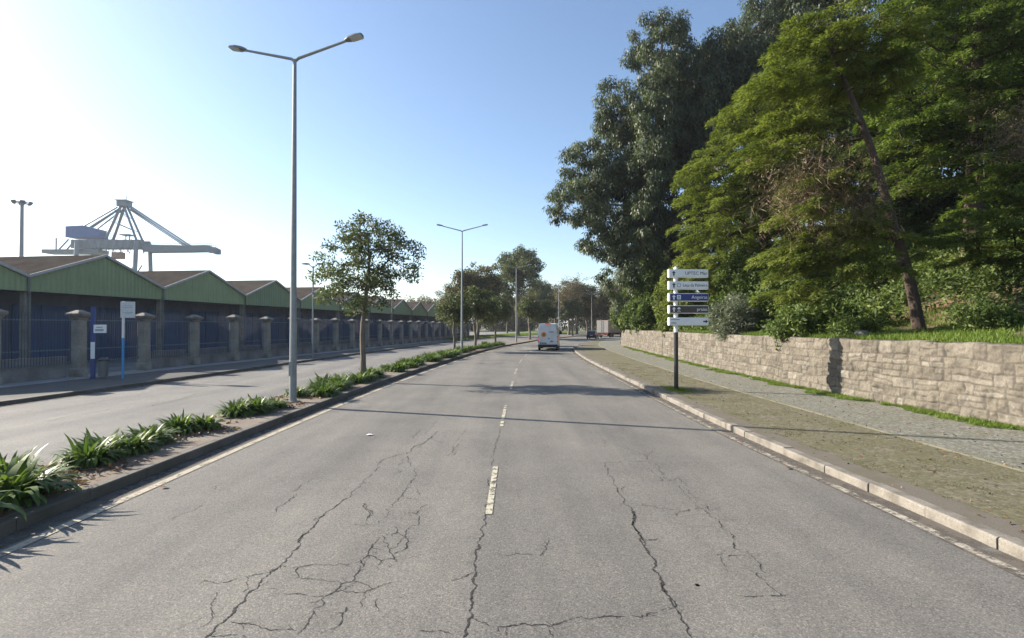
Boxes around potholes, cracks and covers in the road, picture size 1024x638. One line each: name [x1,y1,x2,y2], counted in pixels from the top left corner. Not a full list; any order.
crack [178,419,466,637]
crack [417,379,796,638]
